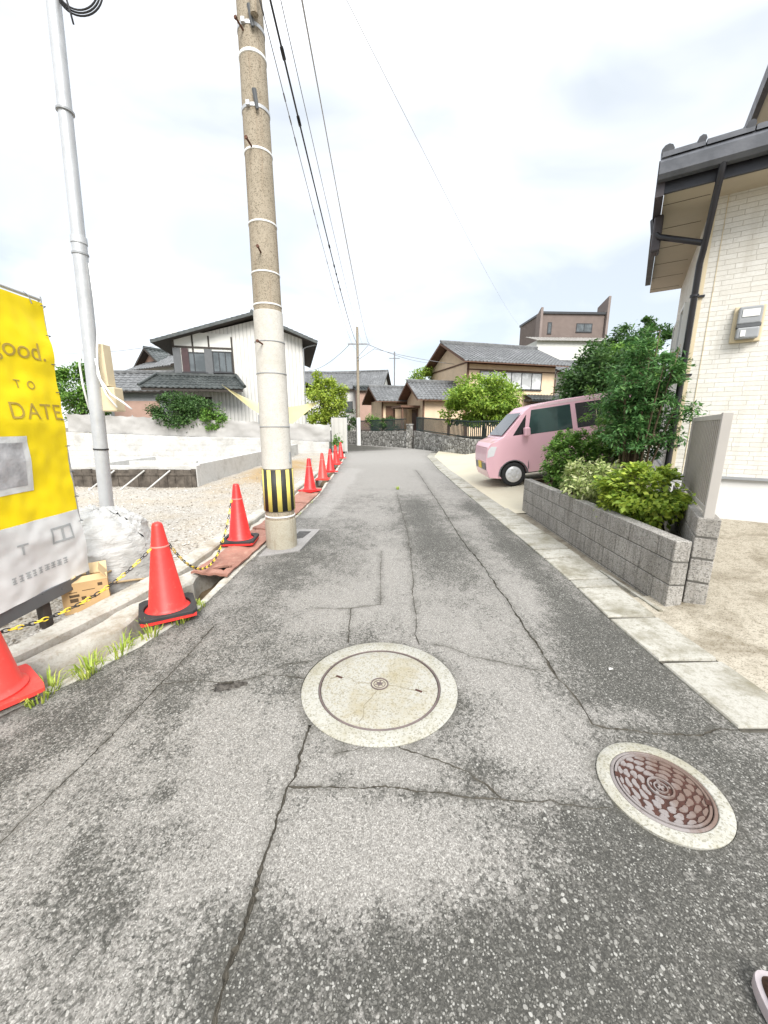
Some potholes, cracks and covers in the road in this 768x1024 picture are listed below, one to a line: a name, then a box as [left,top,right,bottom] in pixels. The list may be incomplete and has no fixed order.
manhole cover [596,742,737,851]
crack [0,626,309,843]
manhole cover [301,642,458,752]
crack [400,473,737,737]
crack [328,551,382,643]
crack [211,725,609,1024]
